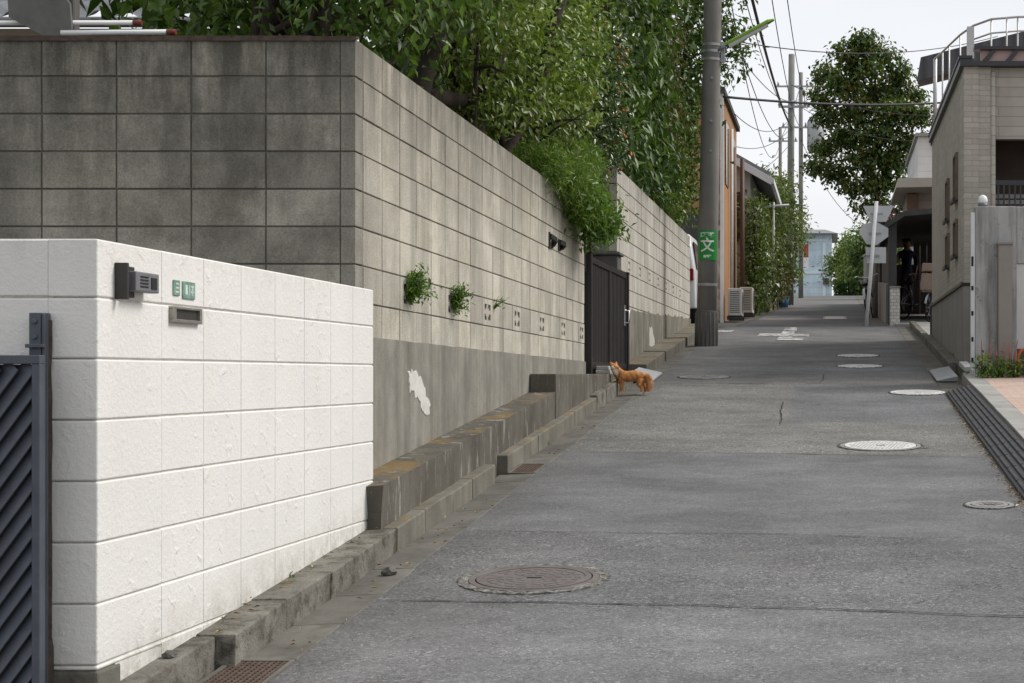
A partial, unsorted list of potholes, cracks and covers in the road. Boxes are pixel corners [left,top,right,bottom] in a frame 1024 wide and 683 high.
drain grate [508,464,547,475]
manhole cover [456,563,611,595]
manhole cover [963,500,1016,510]
manhole cover [837,440,924,451]
drain grate [198,659,295,683]
